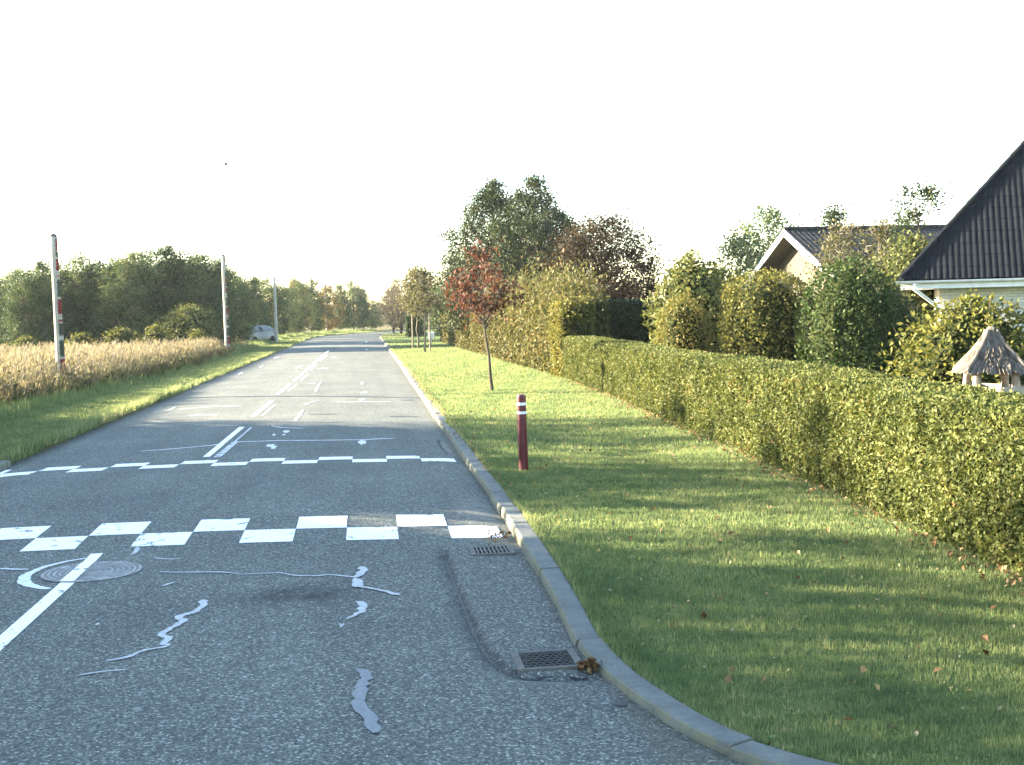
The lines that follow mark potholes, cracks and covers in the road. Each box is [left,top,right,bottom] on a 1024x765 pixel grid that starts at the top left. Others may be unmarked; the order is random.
drain grate [510,648,581,674]
manhole cover [40,561,143,583]
drain grate [468,545,516,556]
